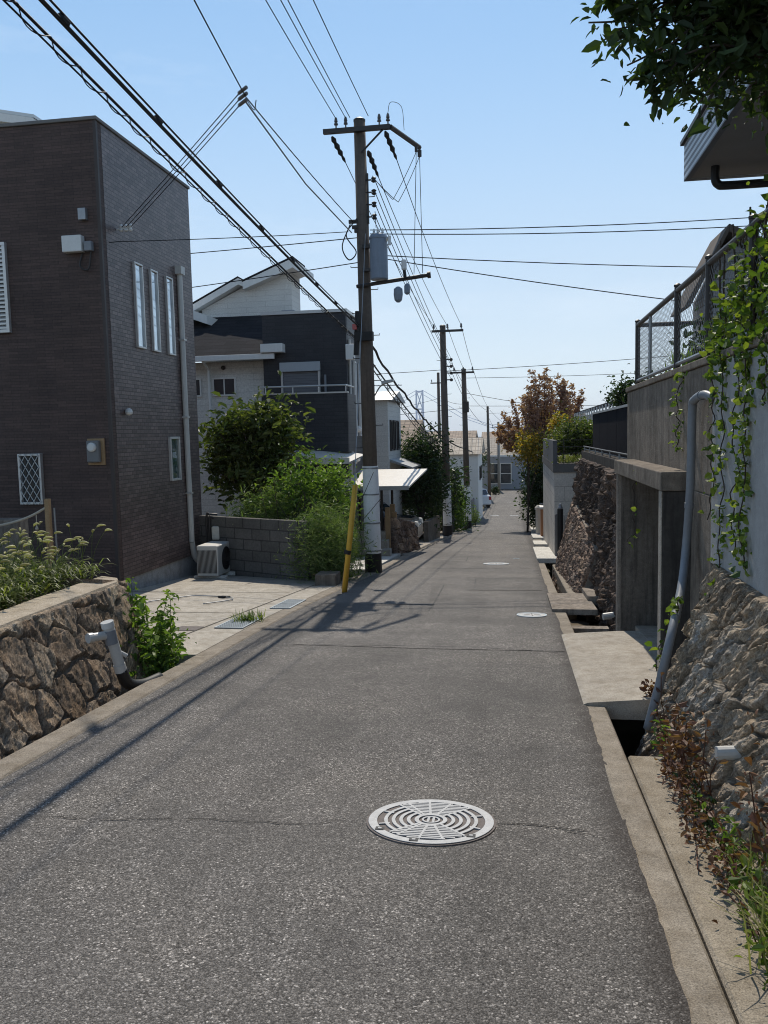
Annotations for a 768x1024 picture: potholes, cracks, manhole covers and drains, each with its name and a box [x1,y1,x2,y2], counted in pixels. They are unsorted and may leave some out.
crack [496,823,605,839]
crack [54,816,343,824]
drain grate [214,617,261,629]
manhole cover [366,799,496,847]
drain grate [270,599,306,609]
